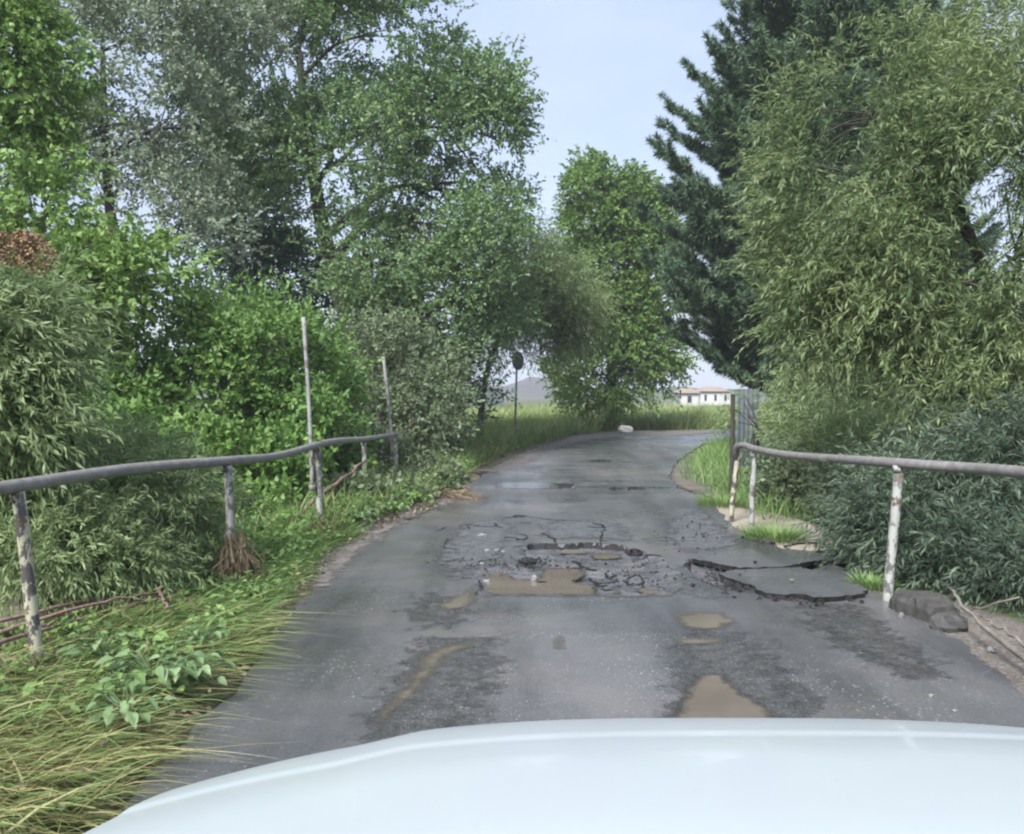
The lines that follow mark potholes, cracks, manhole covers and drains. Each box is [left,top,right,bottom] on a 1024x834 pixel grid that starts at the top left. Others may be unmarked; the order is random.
crack [588,523,609,543]
crack [427,527,483,595]
crack [465,521,559,547]
pothole [464,542,685,597]
crack [571,548,661,591]
